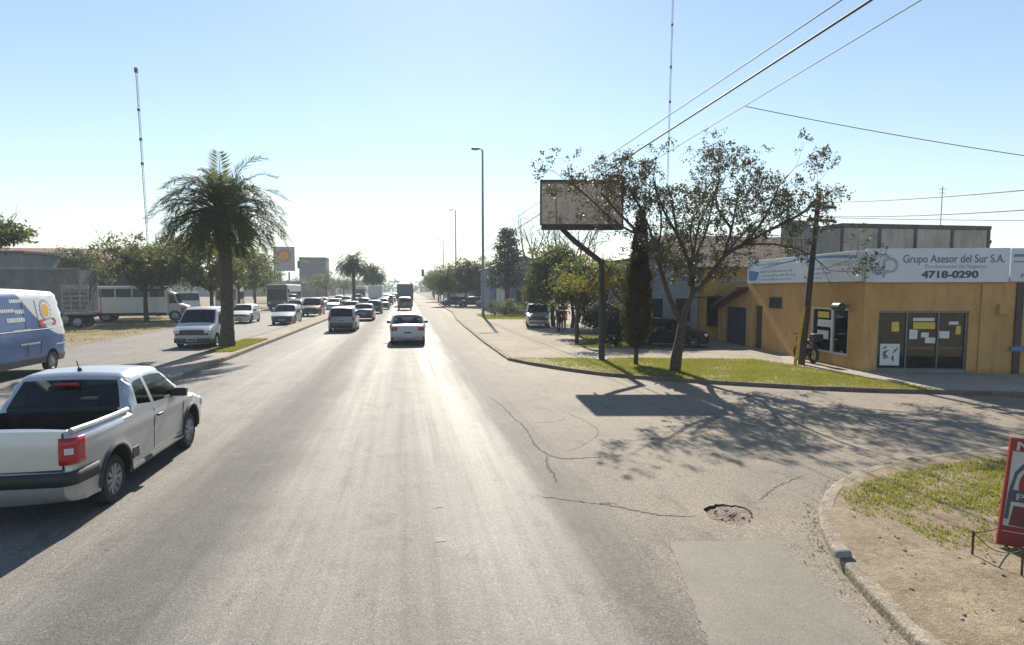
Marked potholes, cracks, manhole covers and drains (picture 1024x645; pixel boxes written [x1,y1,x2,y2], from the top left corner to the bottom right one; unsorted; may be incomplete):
crack [491,398,694,517]
pothole [704,504,753,526]
